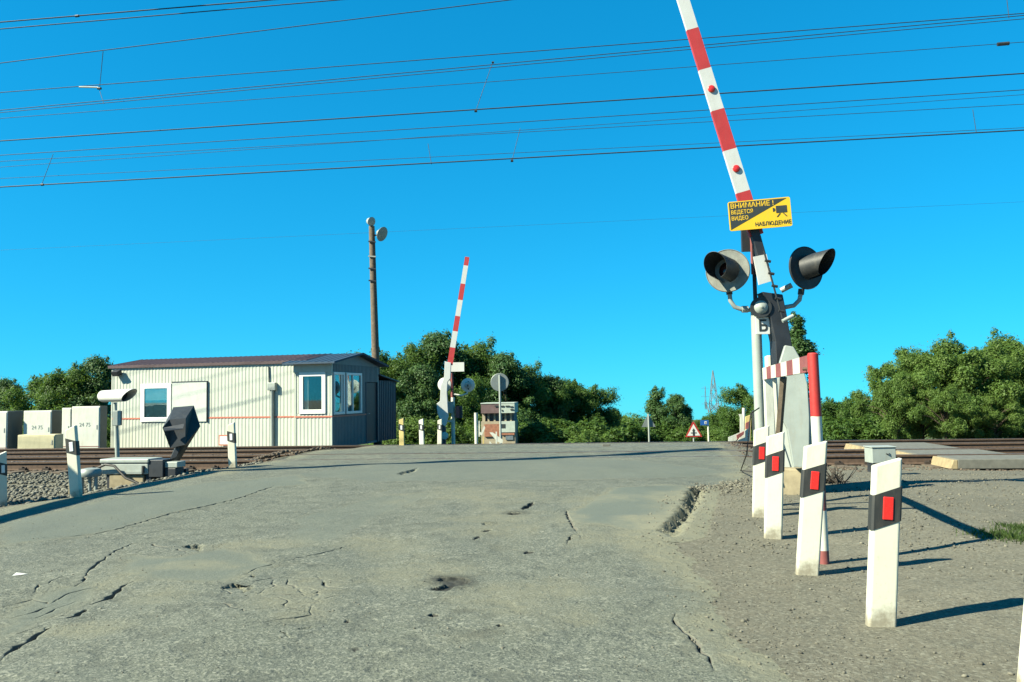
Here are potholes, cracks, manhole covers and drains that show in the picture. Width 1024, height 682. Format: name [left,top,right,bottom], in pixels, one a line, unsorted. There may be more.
crack [659,613,731,671]
crack [548,508,591,544]
pothole [164,542,214,554]
pothole [461,534,490,542]
crack [199,545,366,627]
pothole [418,575,481,594]
pothole [637,483,721,543]
pothole [388,467,425,476]
crack [0,540,197,662]
pothole [511,500,542,511]
